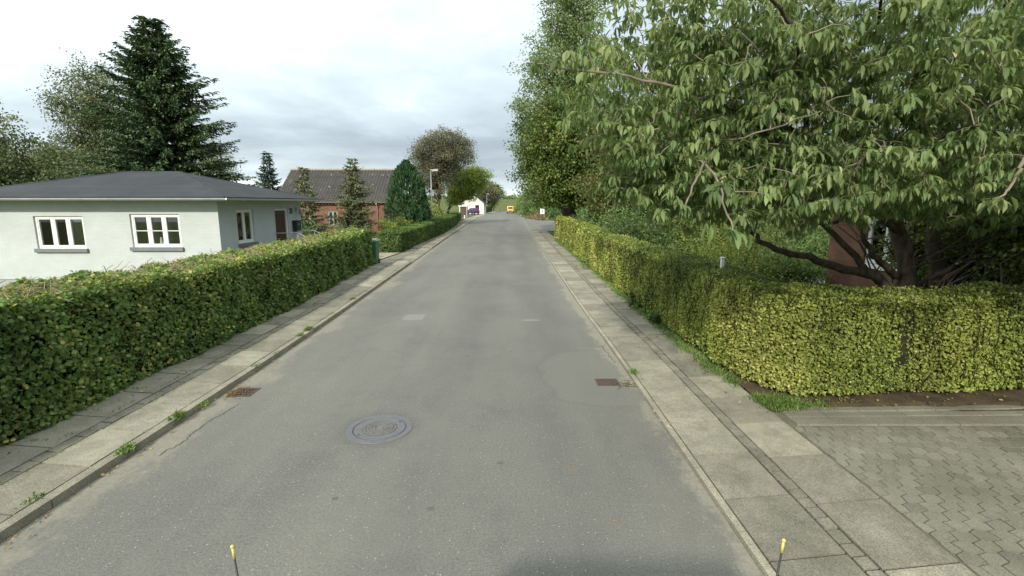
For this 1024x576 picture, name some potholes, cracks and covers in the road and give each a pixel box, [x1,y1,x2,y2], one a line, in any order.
crack [160,404,240,456]
manhole cover [346,414,413,444]
drain grate [226,388,261,397]
